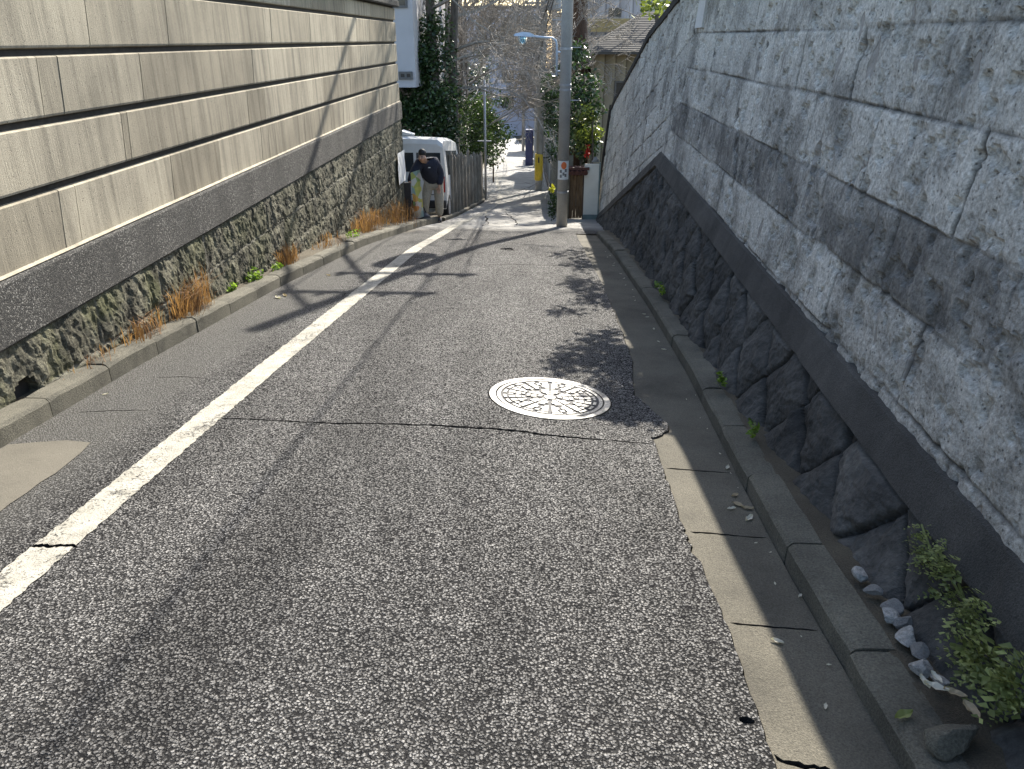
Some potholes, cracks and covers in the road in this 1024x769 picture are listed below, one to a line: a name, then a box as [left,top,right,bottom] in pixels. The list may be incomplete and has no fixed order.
manhole cover [489,377,611,420]
